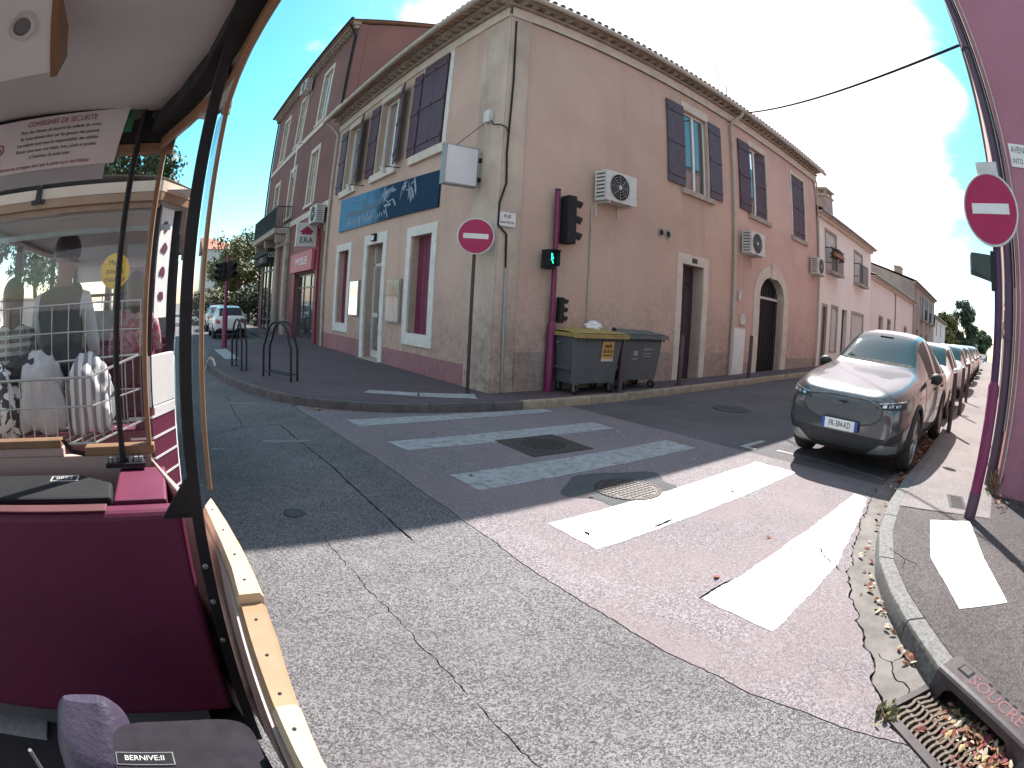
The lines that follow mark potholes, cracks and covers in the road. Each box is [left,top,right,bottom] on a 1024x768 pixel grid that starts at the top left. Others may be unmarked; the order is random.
manhole cover [713,405,751,413]
crack [328,543,541,768]
manhole cover [594,478,662,501]
manhole cover [947,494,966,510]
manhole cover [495,434,594,457]
manhole cover [283,508,305,518]
crack [846,496,910,710]
